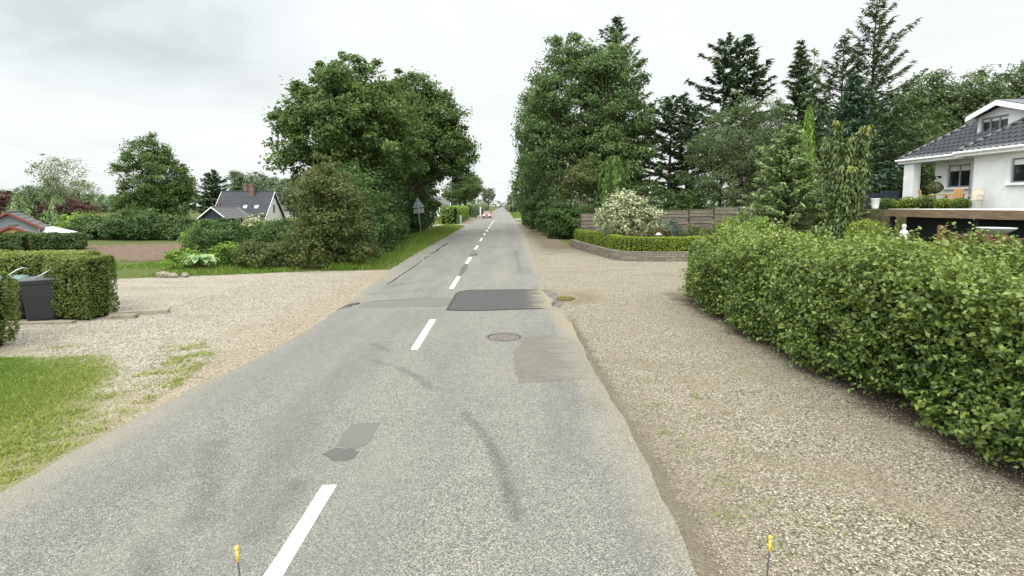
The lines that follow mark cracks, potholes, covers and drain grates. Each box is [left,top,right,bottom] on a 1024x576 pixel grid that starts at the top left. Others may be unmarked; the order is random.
manhole cover [486,333,522,342]
